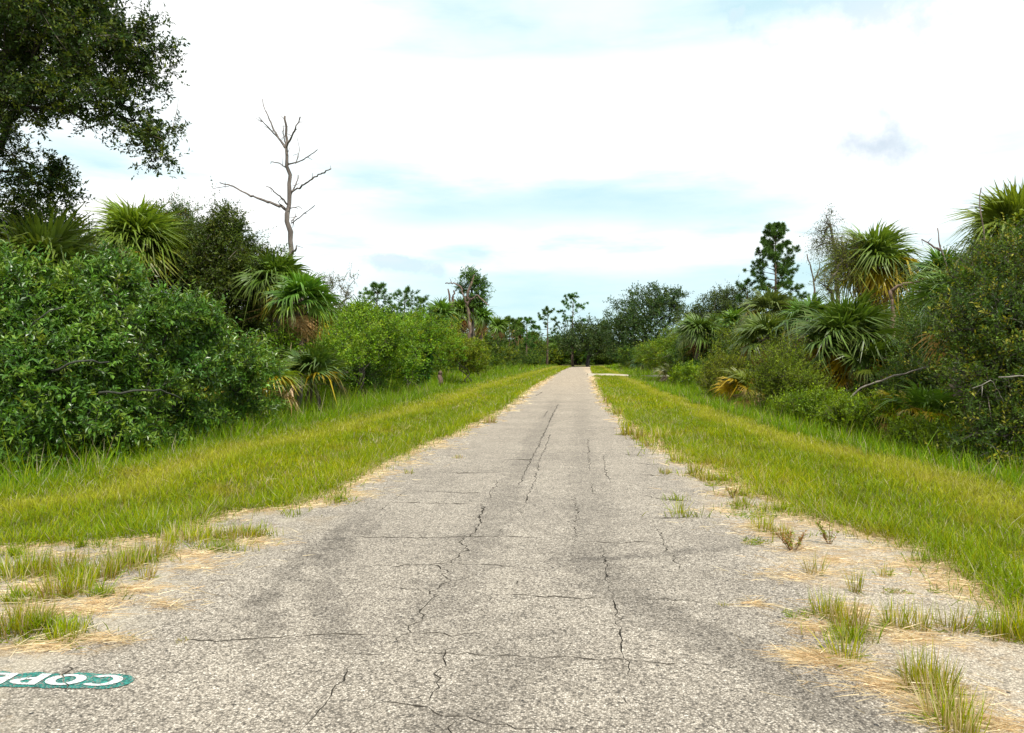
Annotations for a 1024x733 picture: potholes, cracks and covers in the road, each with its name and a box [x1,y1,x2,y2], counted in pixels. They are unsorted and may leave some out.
crack [174,439,732,733]
